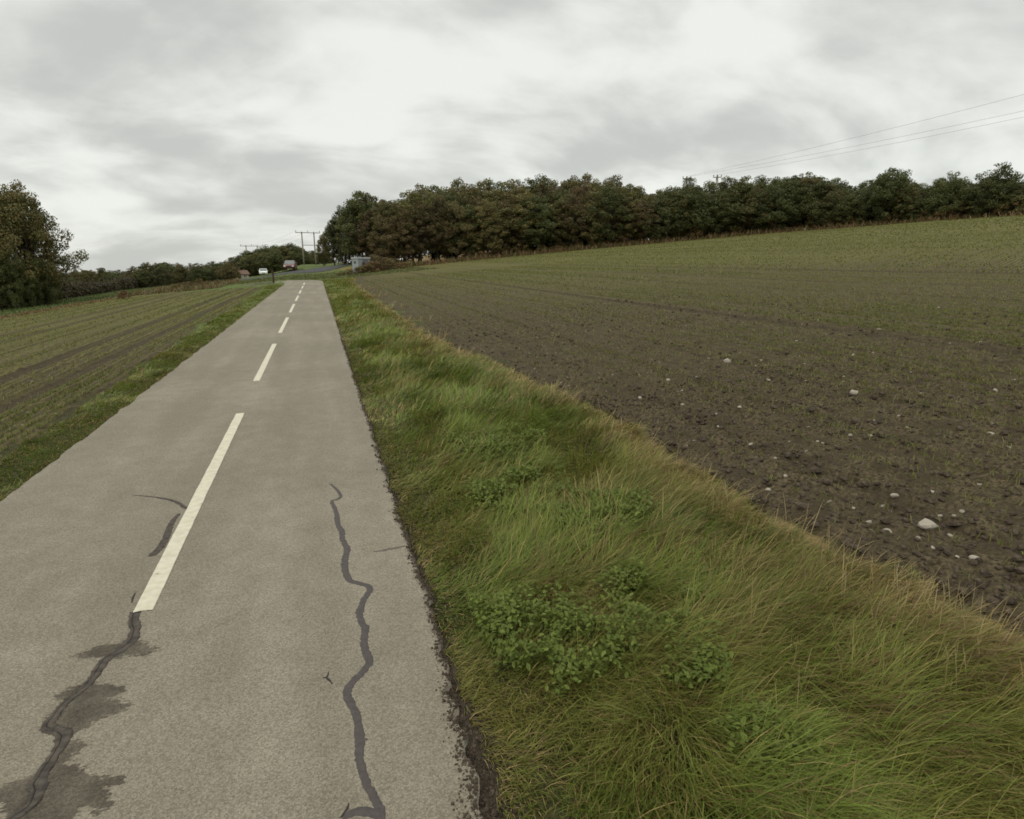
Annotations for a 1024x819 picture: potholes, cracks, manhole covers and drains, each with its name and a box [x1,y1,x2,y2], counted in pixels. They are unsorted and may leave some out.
crack [134,495,187,509]
crack [6,593,142,819]
